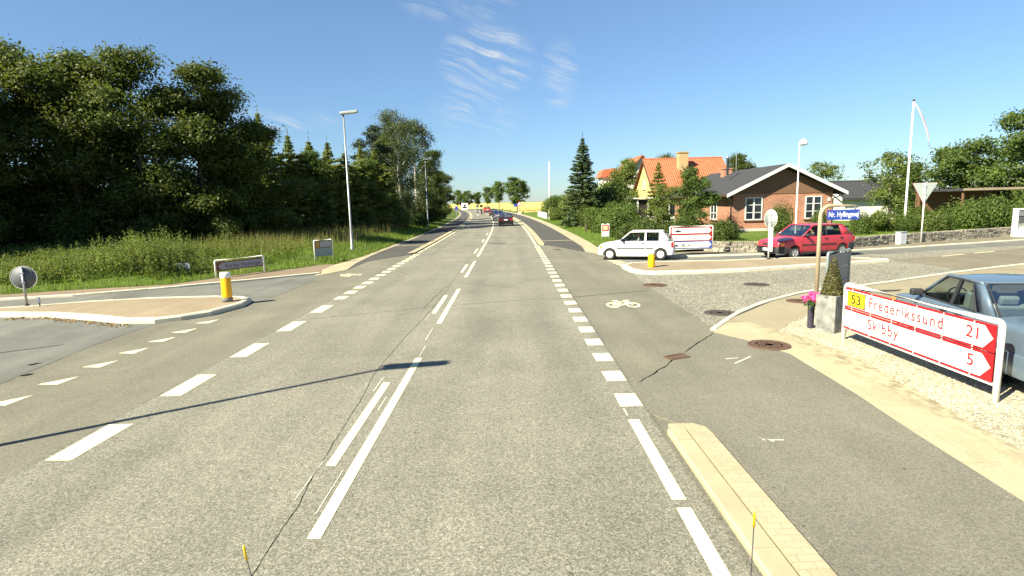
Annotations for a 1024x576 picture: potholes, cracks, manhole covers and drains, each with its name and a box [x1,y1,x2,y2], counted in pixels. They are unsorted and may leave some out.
manhole cover [747,340,791,351]
crack [252,260,641,576]
crack [638,333,713,383]
